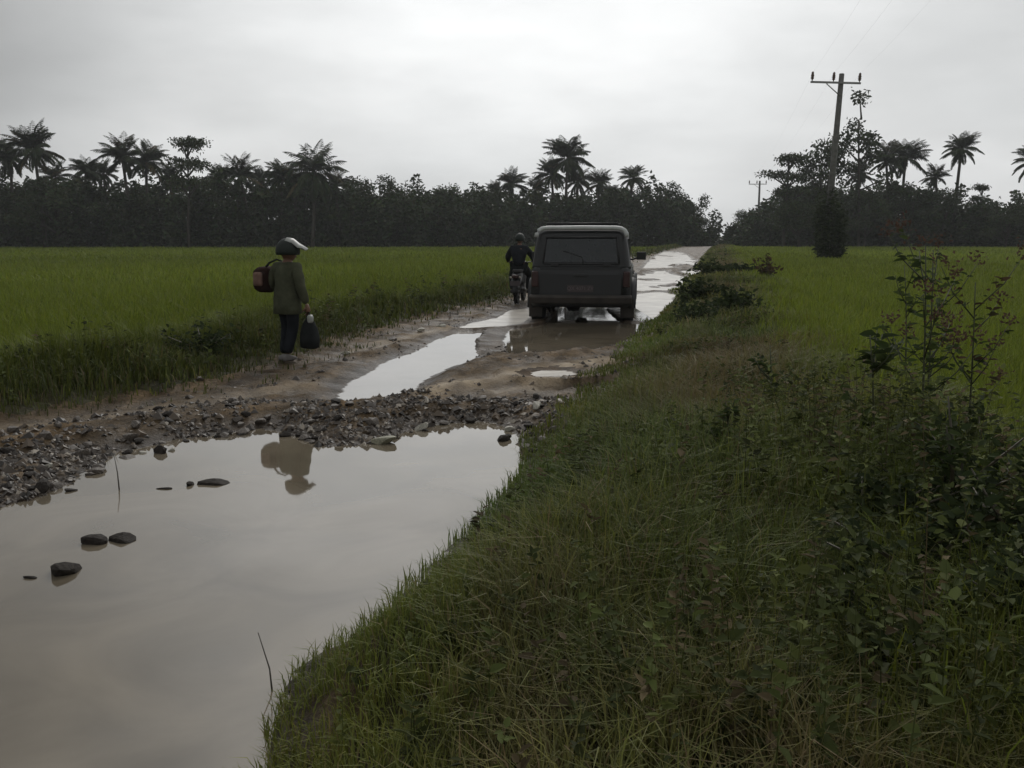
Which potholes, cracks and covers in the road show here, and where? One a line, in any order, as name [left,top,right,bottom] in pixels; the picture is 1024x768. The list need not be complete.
pothole [492,307,650,354]
pothole [0,411,544,768]
pothole [323,326,503,401]
pothole [514,365,593,377]
